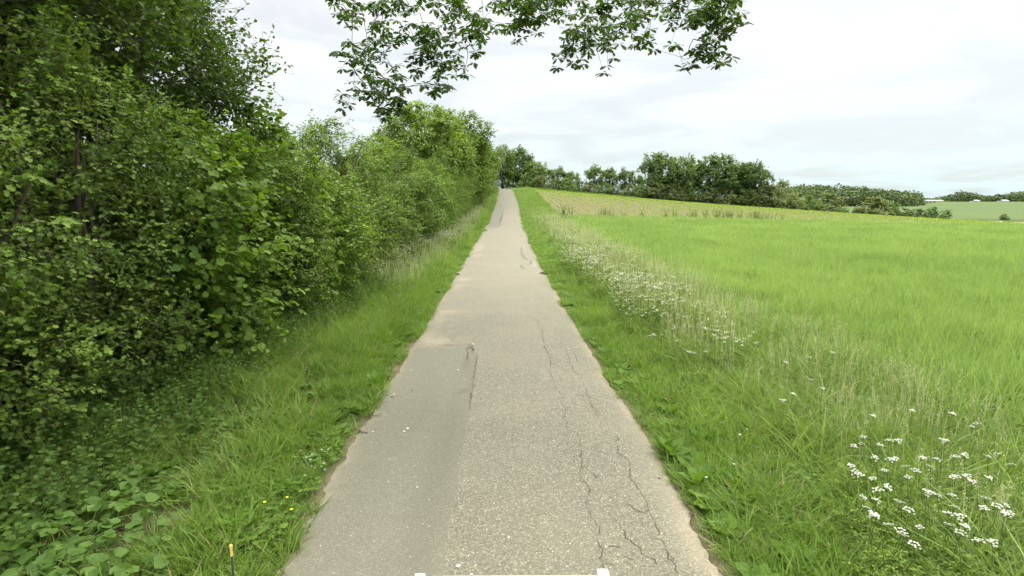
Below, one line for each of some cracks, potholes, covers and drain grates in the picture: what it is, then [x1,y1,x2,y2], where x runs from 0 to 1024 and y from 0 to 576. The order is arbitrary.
crack [537,322,679,574]
